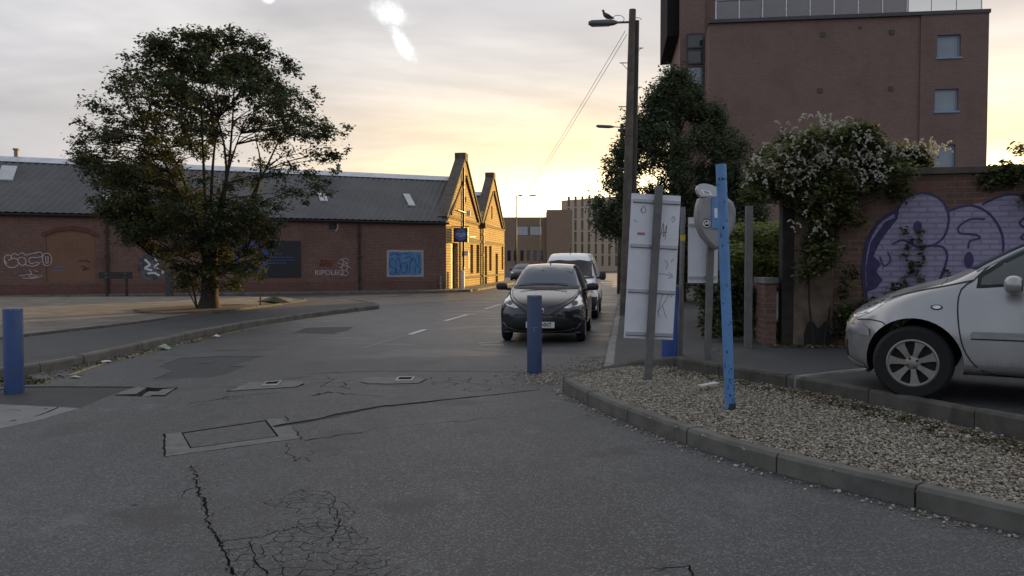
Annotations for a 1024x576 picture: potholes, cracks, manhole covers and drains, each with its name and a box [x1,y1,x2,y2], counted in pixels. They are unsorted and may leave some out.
crack [641,564,694,576]
manhole cover [162,419,300,457]
crack [285,416,374,462]
crack [312,377,372,396]
manhole cover [114,387,177,396]
crack [181,465,406,576]
